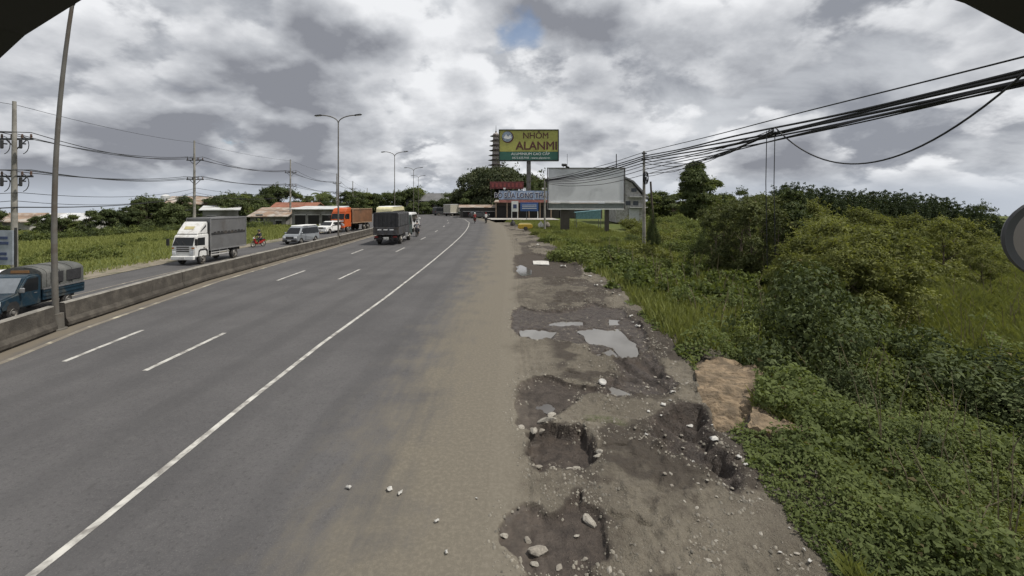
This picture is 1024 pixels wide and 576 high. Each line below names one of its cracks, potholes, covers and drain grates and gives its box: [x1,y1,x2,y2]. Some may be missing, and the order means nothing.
pothole [514,375,600,430]
pothole [498,488,610,576]
pothole [646,402,745,492]
pothole [512,252,582,279]
pothole [525,422,596,472]
pothole [510,302,651,359]
